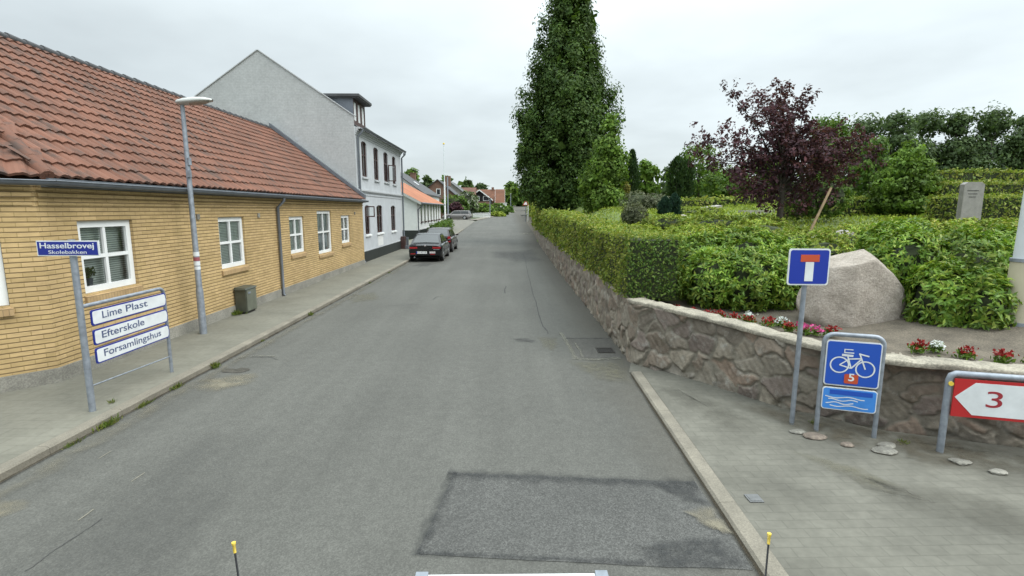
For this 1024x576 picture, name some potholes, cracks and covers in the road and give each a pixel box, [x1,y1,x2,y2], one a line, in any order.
crack [25,518,102,571]
